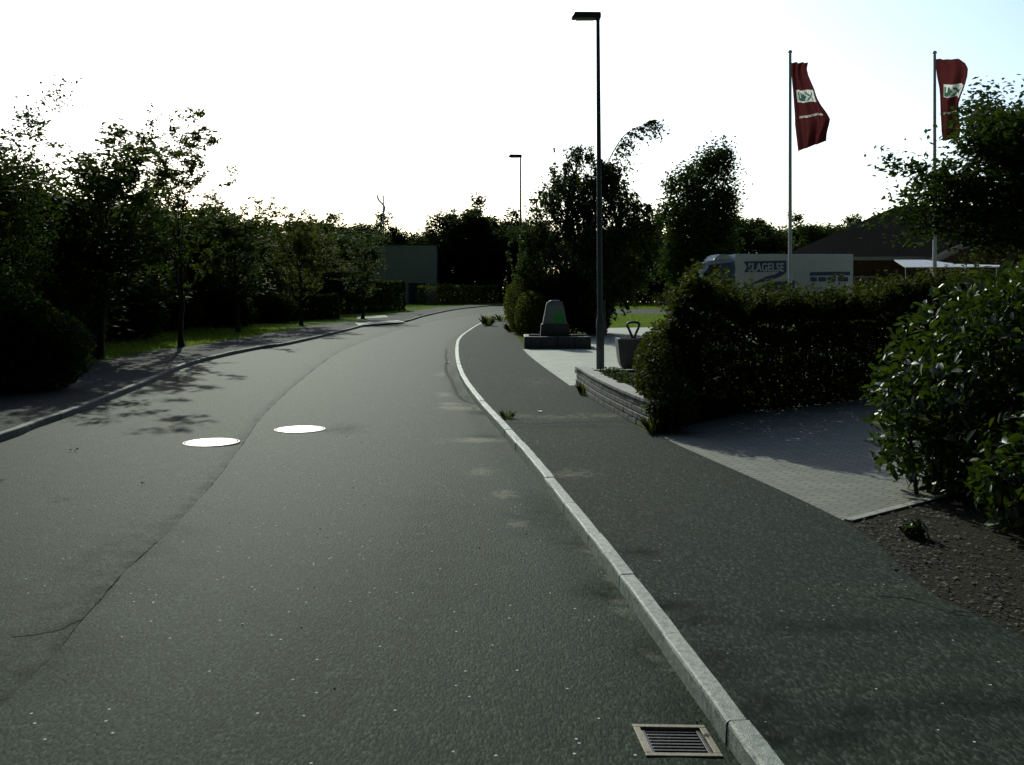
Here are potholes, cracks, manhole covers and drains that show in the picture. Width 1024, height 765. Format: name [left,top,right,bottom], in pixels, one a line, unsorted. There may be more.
crack [13,313,480,690]
drain grate [632,724,723,758]
manhole cover [182,438,240,447]
